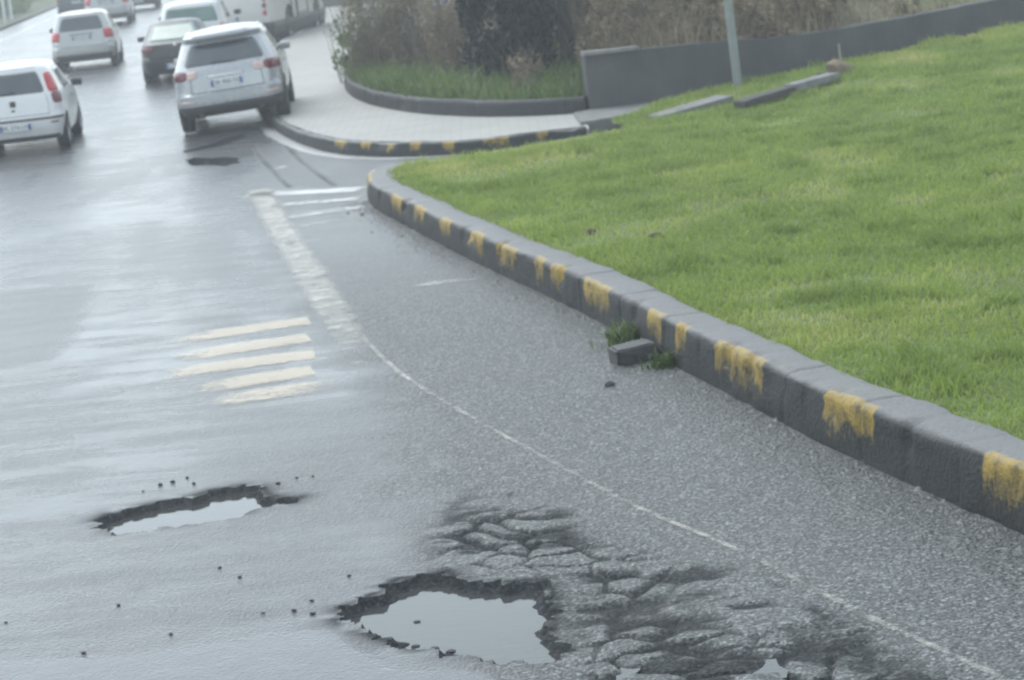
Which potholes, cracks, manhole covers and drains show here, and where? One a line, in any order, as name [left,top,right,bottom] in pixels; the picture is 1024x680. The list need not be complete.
pothole [90,484,302,536]
crack [425,494,952,680]
pothole [334,570,577,665]
